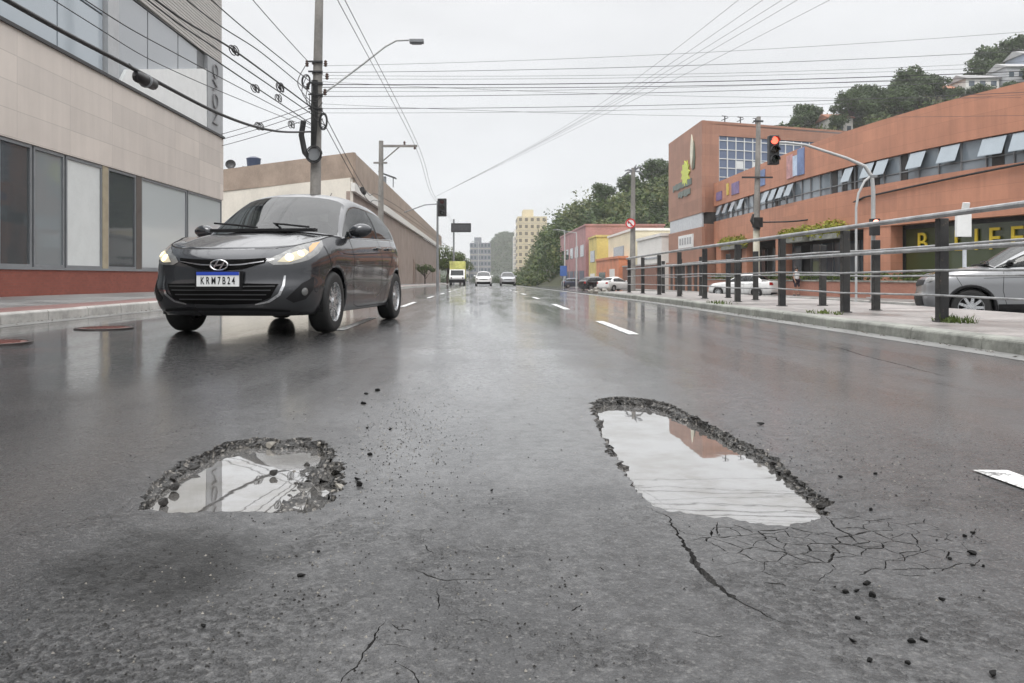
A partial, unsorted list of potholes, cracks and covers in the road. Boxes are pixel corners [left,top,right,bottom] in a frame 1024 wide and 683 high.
pothole [589,396,835,526]
crack [415,570,493,612]
crack [647,507,1004,625]
crack [340,620,419,683]
pothole [138,437,358,514]
